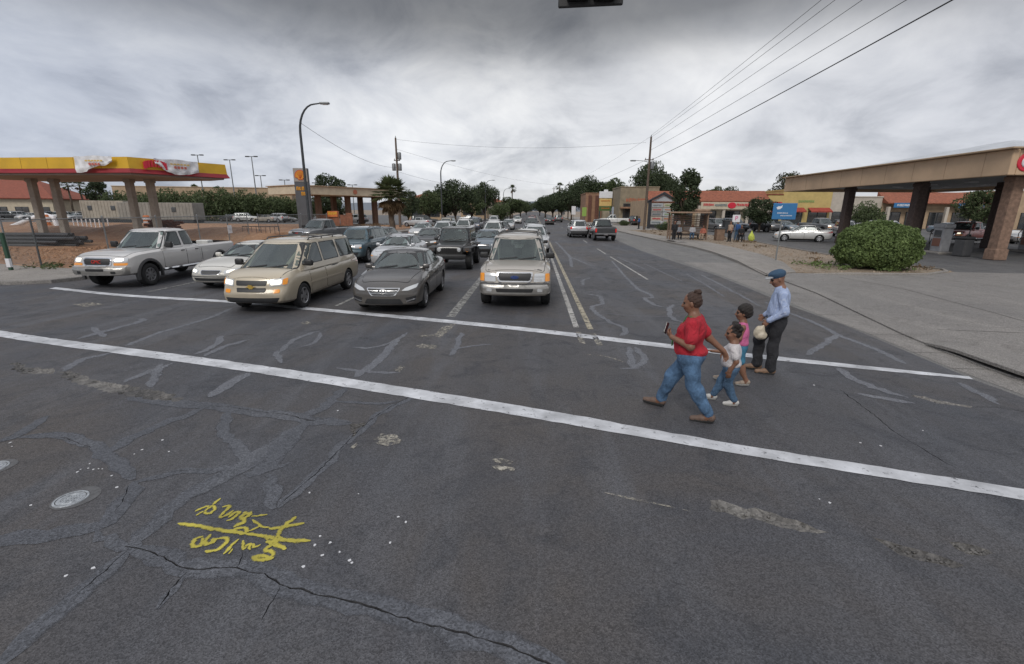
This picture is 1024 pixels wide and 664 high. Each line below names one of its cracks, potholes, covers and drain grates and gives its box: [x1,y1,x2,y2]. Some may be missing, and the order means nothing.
crack [261,397,412,509]
manhole cover [0,459,18,472]
crack [841,390,955,467]
crack [0,472,568,664]
manhole cover [49,486,102,510]
